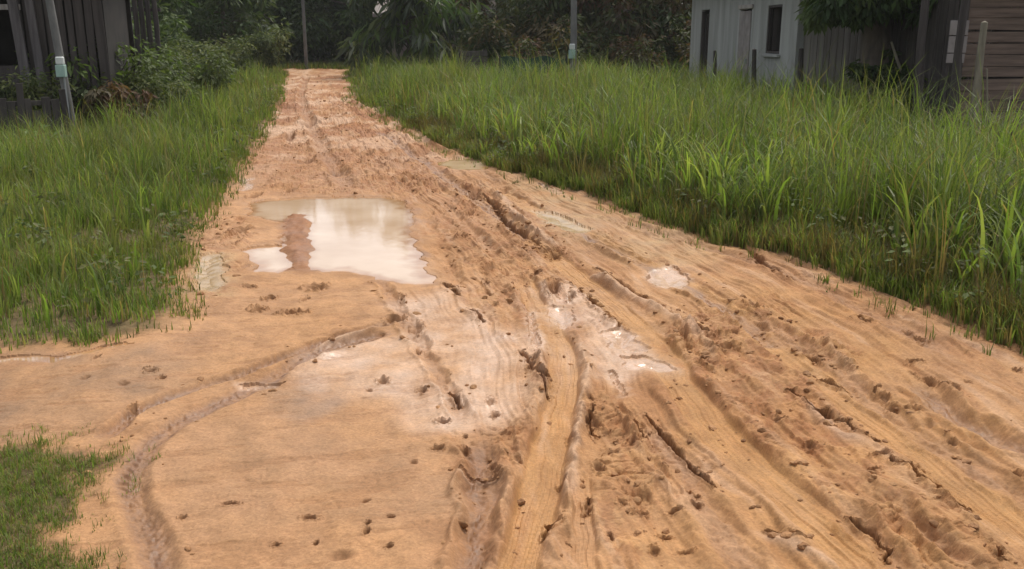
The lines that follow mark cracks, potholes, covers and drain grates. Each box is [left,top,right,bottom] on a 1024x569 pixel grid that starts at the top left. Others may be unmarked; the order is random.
pothole [643,264,693,290]
pothole [530,209,595,233]
pothole [238,195,438,285]
